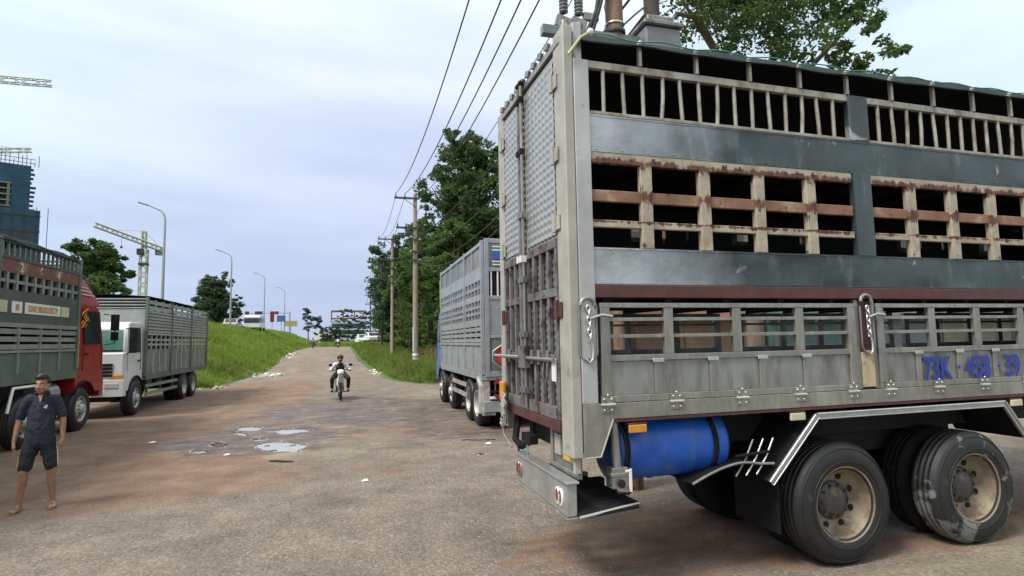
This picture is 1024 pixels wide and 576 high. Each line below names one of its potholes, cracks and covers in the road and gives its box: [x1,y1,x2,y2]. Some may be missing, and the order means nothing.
pothole [252,441,310,452]
